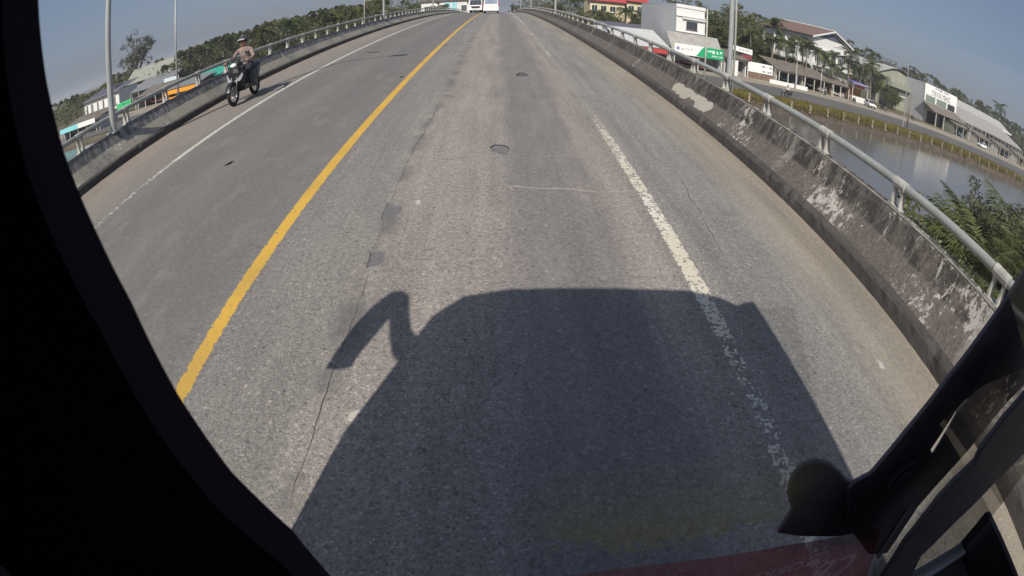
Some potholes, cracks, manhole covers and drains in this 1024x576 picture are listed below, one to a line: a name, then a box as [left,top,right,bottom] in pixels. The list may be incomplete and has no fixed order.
crack [291,98,470,512]
crack [487,185,621,195]
crack [629,127,726,263]
pothole [490,144,509,155]
